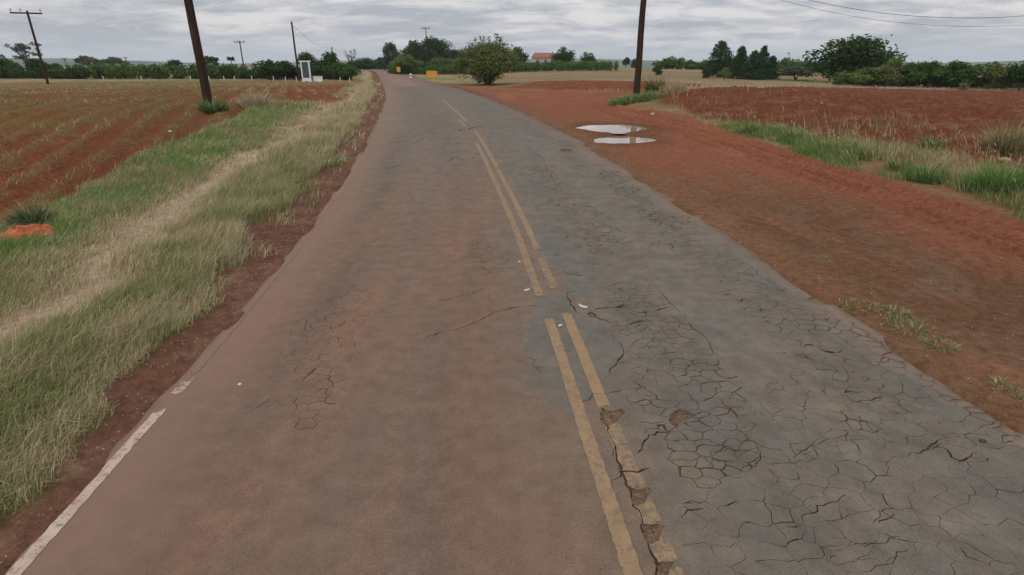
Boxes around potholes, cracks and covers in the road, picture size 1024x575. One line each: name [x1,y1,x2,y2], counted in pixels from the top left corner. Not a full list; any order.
pothole [642,524,665,544]
crack [550,211,1024,575]
crack [266,287,375,430]
pothole [600,406,625,427]
pothole [669,410,695,428]
